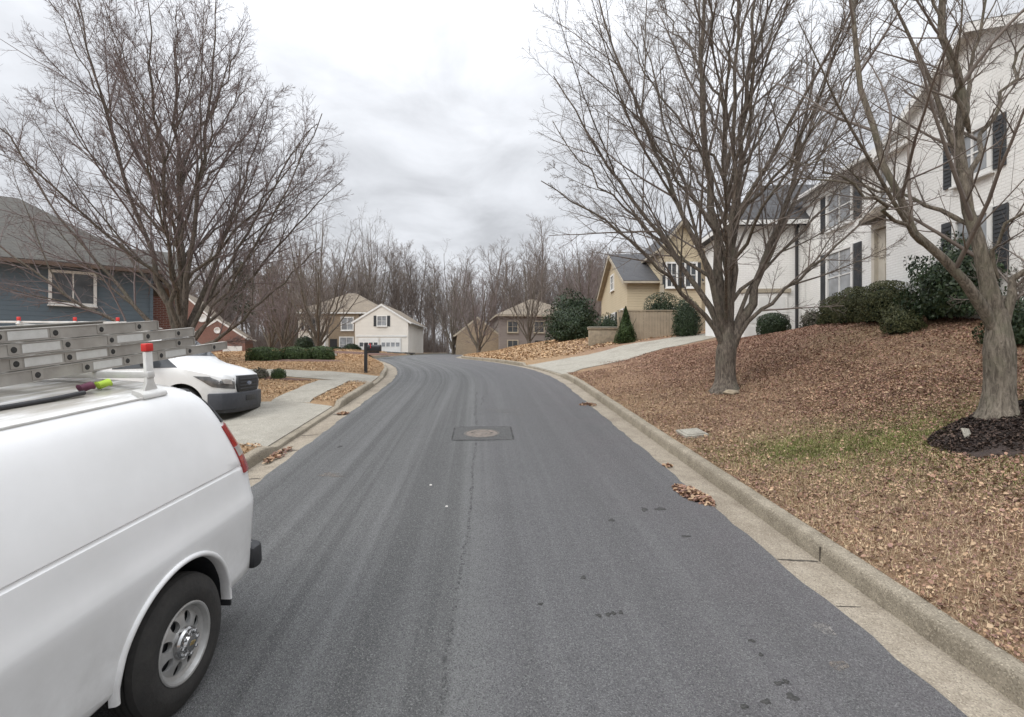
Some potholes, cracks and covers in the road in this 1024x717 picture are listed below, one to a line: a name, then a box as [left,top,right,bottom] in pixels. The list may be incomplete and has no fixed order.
manhole cover [464,429,500,438]
